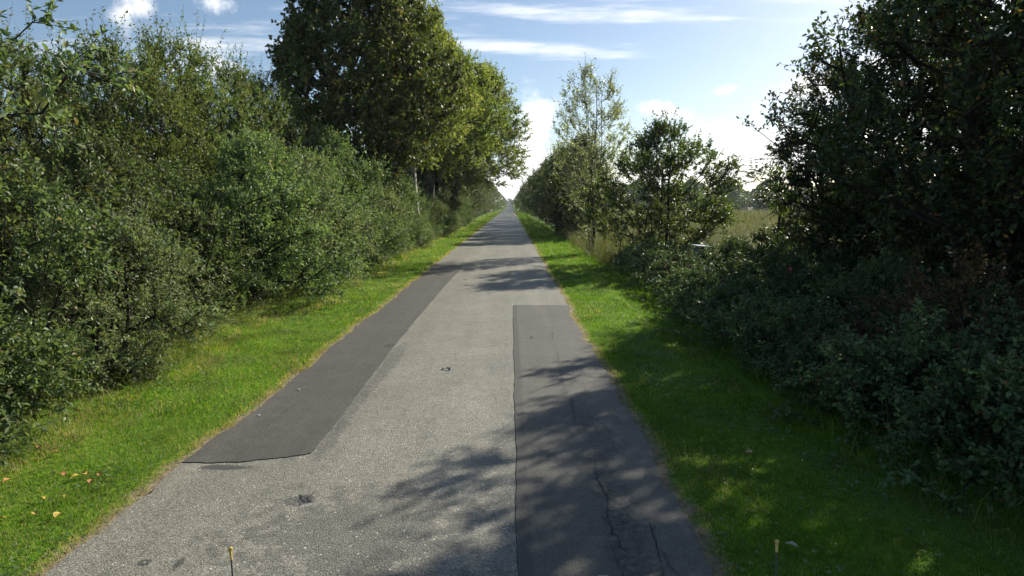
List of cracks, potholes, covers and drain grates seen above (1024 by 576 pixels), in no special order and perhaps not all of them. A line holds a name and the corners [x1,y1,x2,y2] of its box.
crack [552,332,678,576]
pothole [279,493,321,508]
